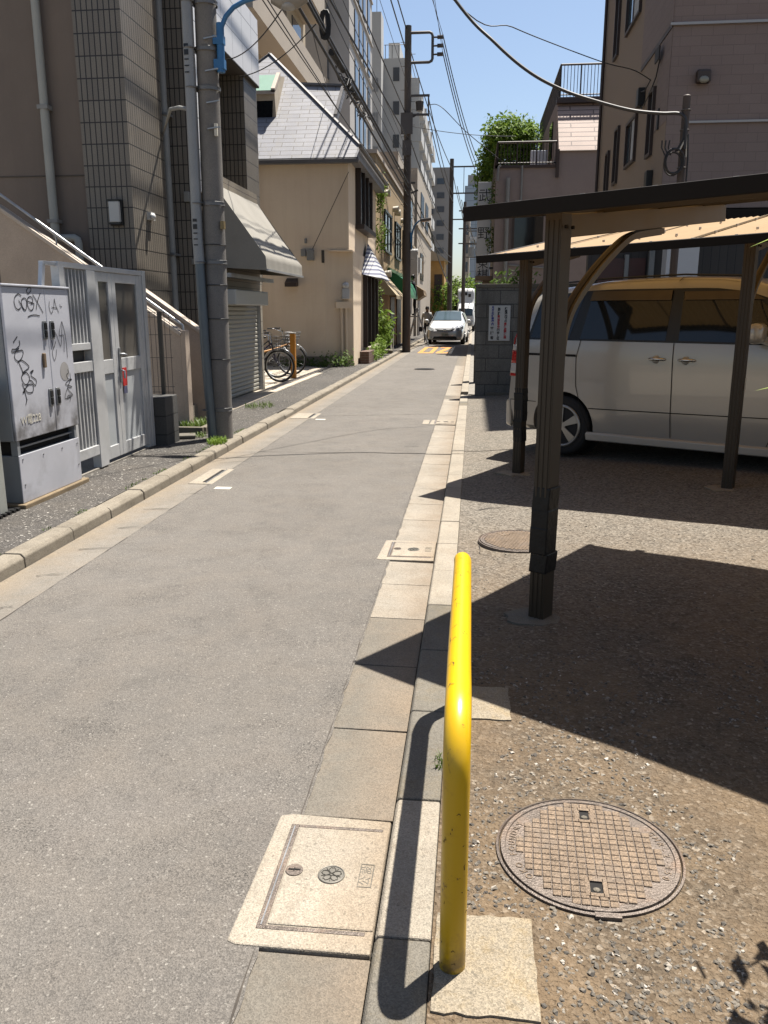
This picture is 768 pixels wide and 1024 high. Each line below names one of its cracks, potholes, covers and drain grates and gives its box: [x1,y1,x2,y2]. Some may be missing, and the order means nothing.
manhole cover [478,530,530,553]
manhole cover [496,799,686,922]
